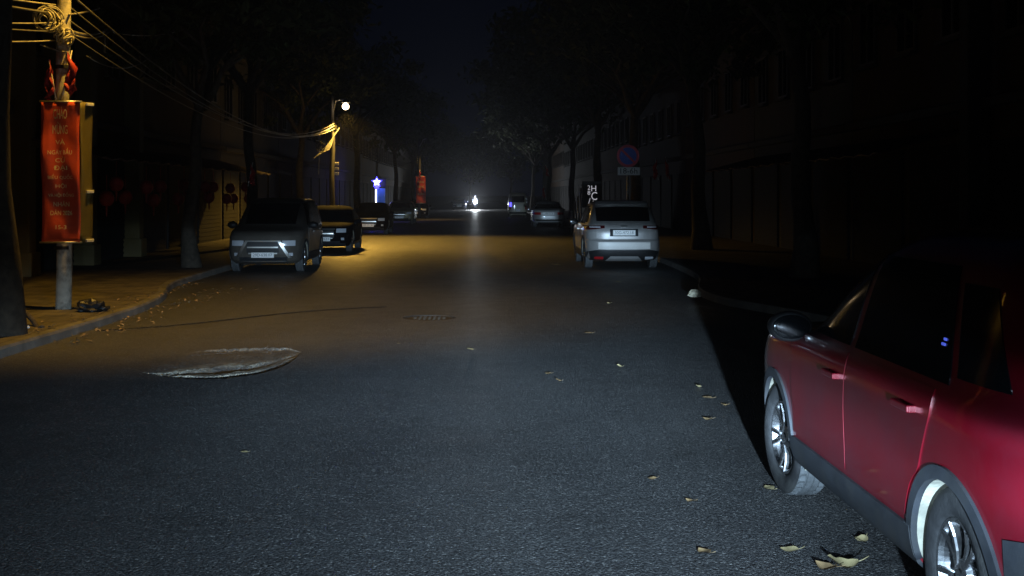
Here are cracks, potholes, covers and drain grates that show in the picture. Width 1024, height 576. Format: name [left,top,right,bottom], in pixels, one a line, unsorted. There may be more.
pothole [143,348,301,379]
